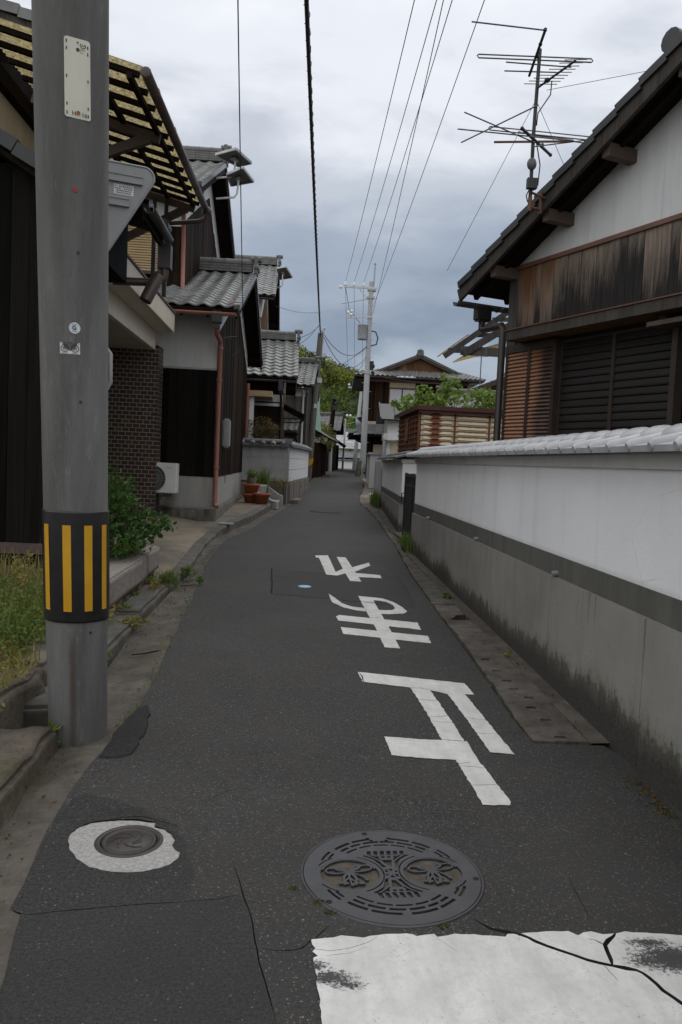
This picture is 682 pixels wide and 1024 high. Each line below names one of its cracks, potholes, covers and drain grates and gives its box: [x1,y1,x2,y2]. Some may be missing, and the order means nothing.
manhole cover [300,830,485,929]
crack [474,877,682,1005]
manhole cover [68,820,180,873]
crack [12,862,330,1024]
